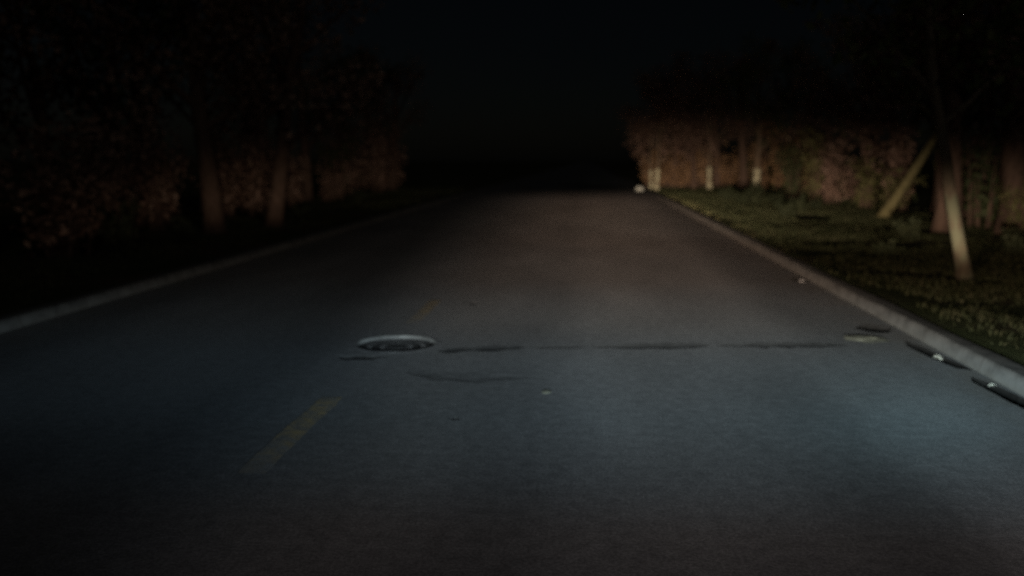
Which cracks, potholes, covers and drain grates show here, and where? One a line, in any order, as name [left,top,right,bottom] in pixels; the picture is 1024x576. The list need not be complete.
manhole cover [351,335,442,353]
